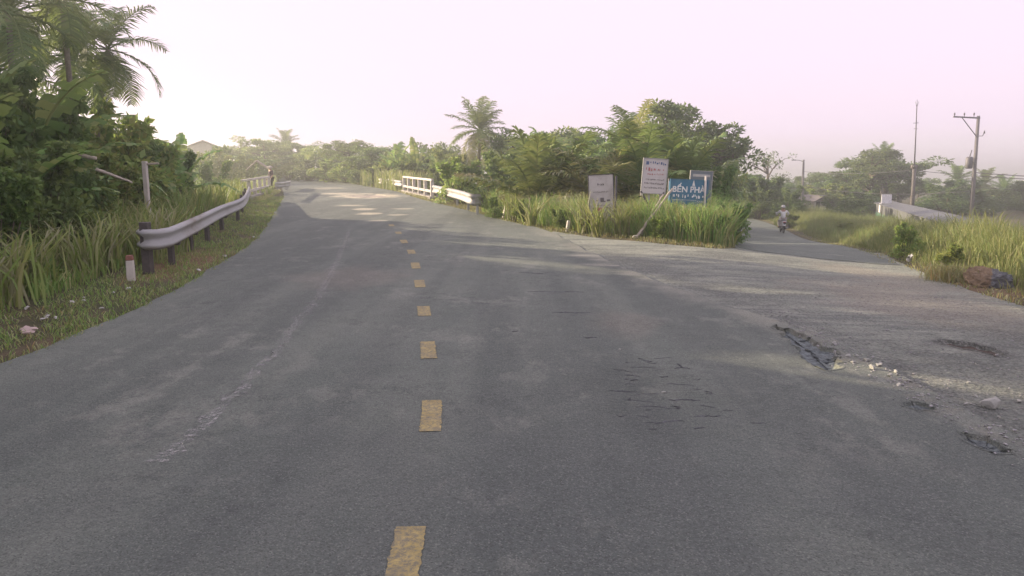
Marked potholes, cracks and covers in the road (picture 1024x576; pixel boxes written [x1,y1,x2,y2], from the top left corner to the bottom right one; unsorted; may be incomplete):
pothole [899,400,940,412]
crack [609,357,761,430]
pothole [934,339,1008,357]
pothole [956,431,1016,455]
pothole [769,324,845,371]
